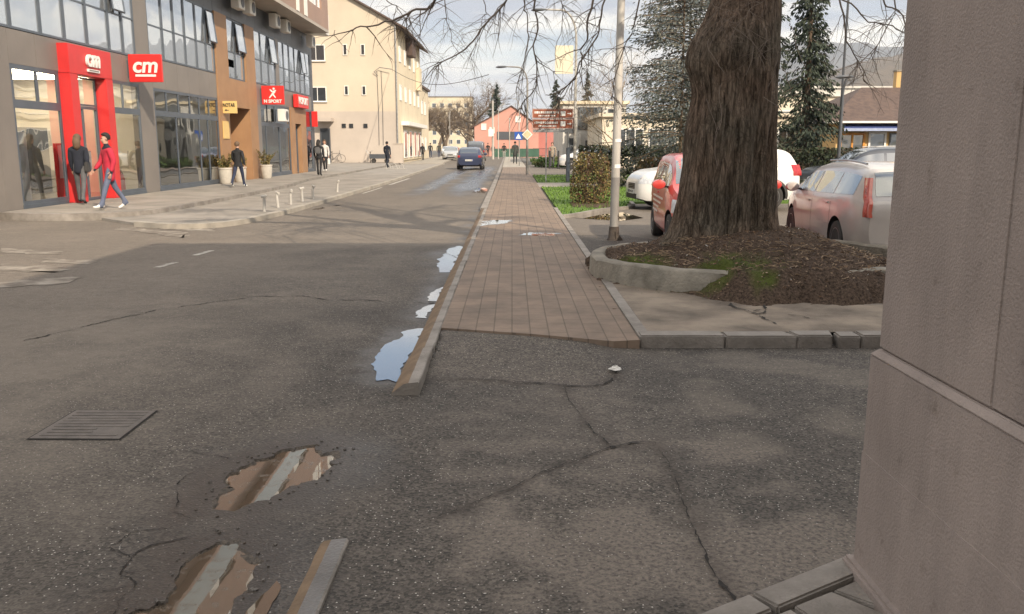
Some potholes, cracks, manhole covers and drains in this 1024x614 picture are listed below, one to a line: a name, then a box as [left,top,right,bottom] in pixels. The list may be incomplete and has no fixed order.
crack [88,472,193,614]
crack [726,301,809,324]
pothole [123,527,277,614]
crack [26,296,420,340]
pothole [194,437,355,518]
